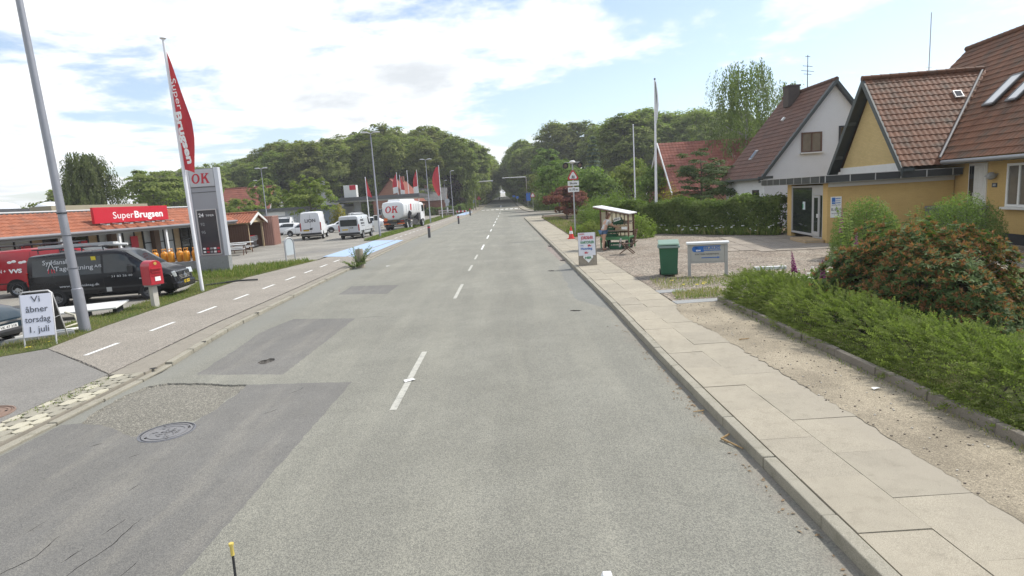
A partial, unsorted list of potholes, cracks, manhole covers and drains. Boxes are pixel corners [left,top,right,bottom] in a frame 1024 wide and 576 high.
manhole cover [0,405,16,418]
crack [1,520,140,576]
manhole cover [137,422,196,443]
